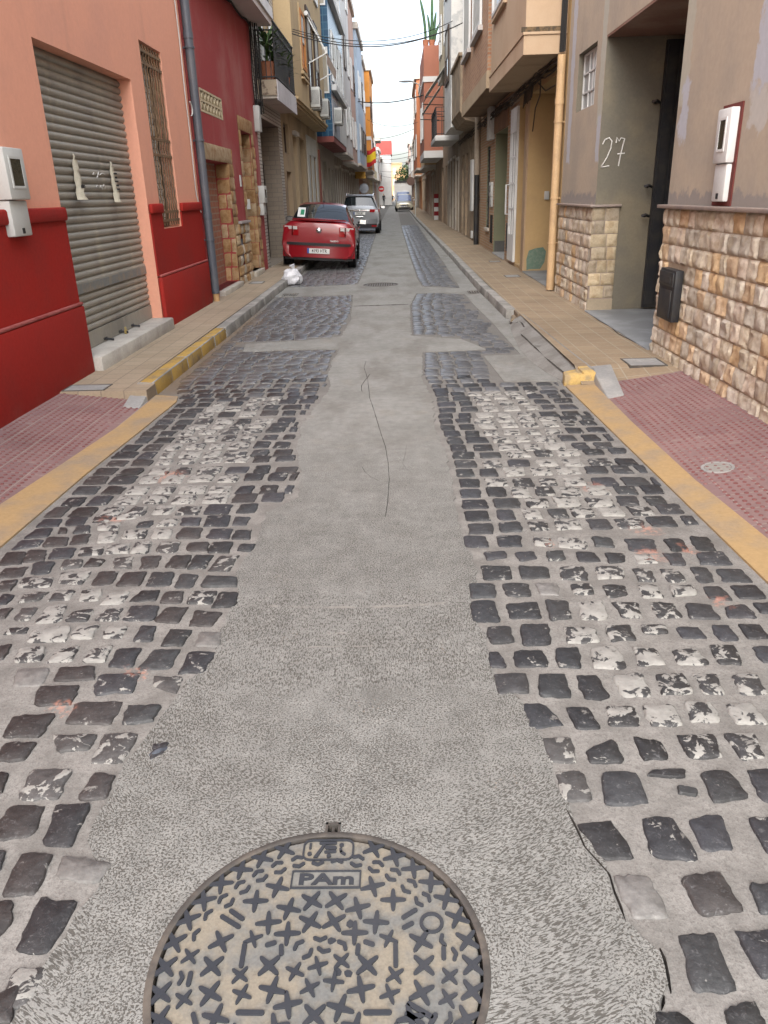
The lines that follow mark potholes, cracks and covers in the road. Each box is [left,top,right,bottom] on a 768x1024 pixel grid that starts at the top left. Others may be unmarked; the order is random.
utility cover [620,358,668,368]
manhole cover [143,822,491,1024]
utility cover [700,461,735,473]
utility cover [61,384,113,392]
crack [361,362,407,517]
